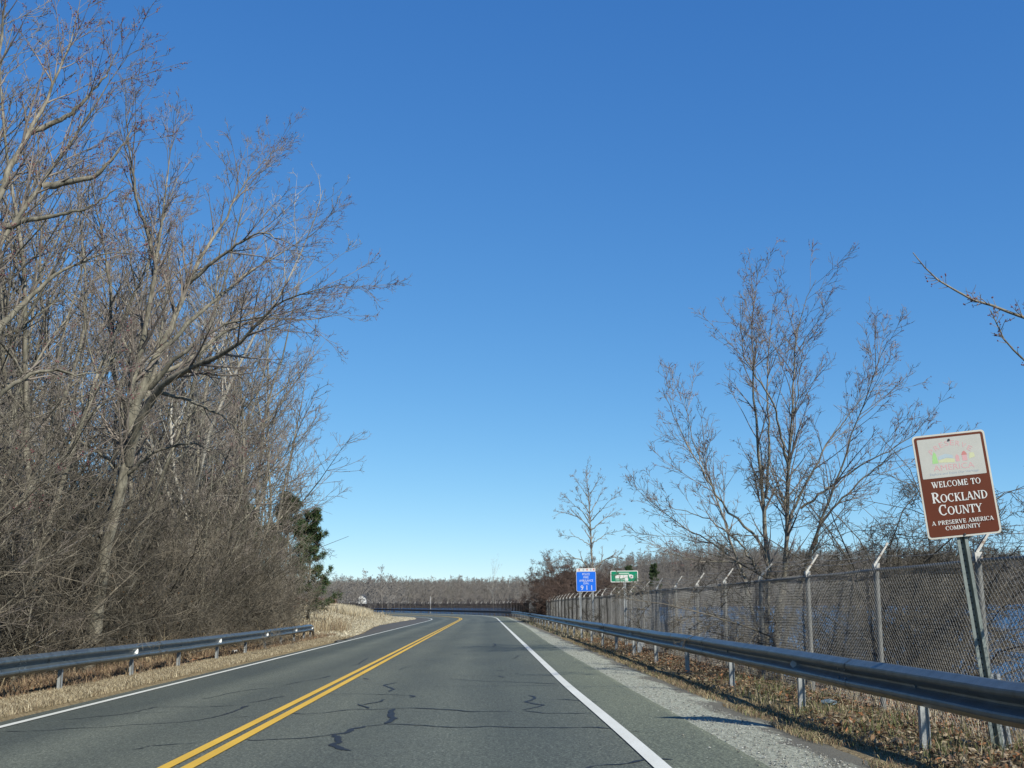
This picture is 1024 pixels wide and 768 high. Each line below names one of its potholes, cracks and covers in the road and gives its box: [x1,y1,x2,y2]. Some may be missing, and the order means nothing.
crack [37,674,329,731]
